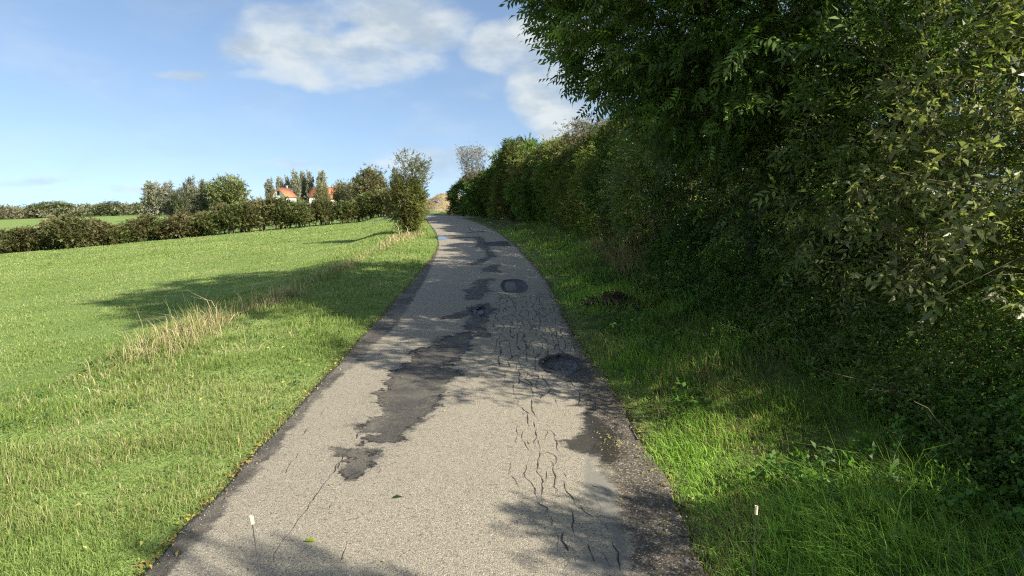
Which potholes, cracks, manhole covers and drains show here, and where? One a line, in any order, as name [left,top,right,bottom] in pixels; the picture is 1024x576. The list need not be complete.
crack [408,227,621,571]
crack [269,434,381,566]
pothole [500,279,528,293]
pothole [538,353,583,378]
